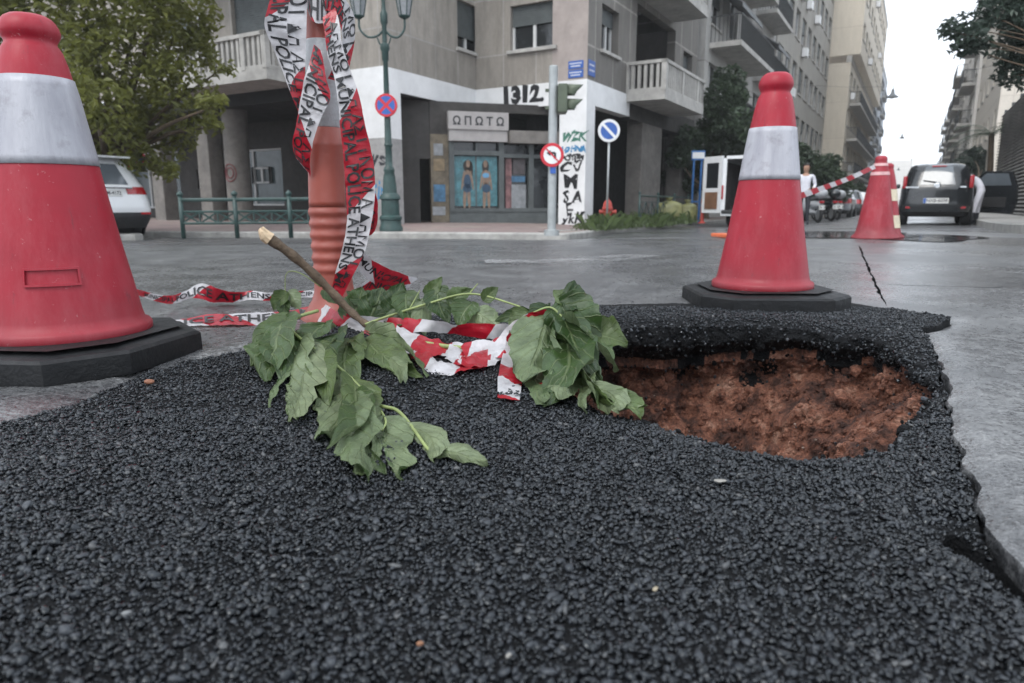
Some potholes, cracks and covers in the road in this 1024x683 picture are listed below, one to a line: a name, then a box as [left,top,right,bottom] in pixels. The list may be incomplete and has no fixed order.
pothole [574,324,944,461]
crack [858,245,1000,304]
